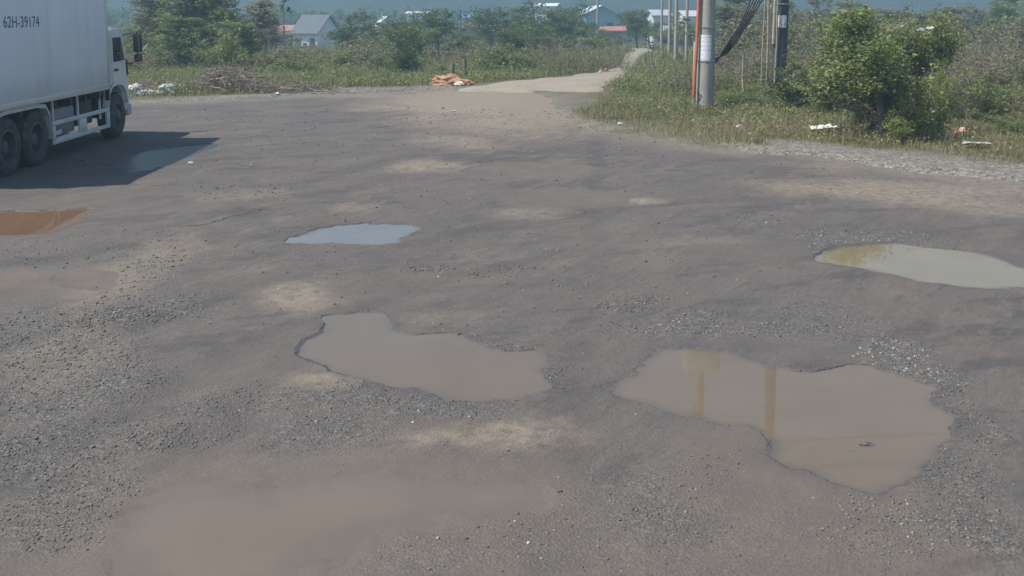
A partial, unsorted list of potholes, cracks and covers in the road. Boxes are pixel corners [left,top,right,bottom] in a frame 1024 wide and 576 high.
pothole [49,269,121,291]
pothole [294,311,553,402]
pothole [90,463,557,576]
crack [184,209,263,227]
pothole [0,207,104,235]
pothole [284,222,423,245]
pothole [812,241,1024,289]
pothole [607,346,956,496]
